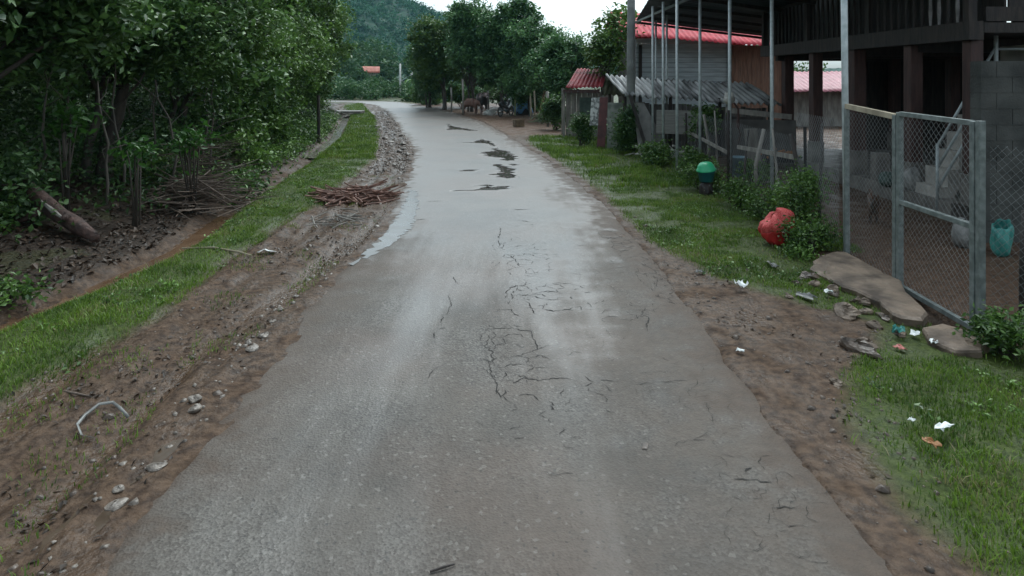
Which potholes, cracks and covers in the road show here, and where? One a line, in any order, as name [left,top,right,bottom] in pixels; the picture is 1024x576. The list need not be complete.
pothole [457,139,498,147]
pothole [451,184,511,192]
crack [473,209,828,563]
pothole [477,147,521,161]
pothole [487,164,520,179]
